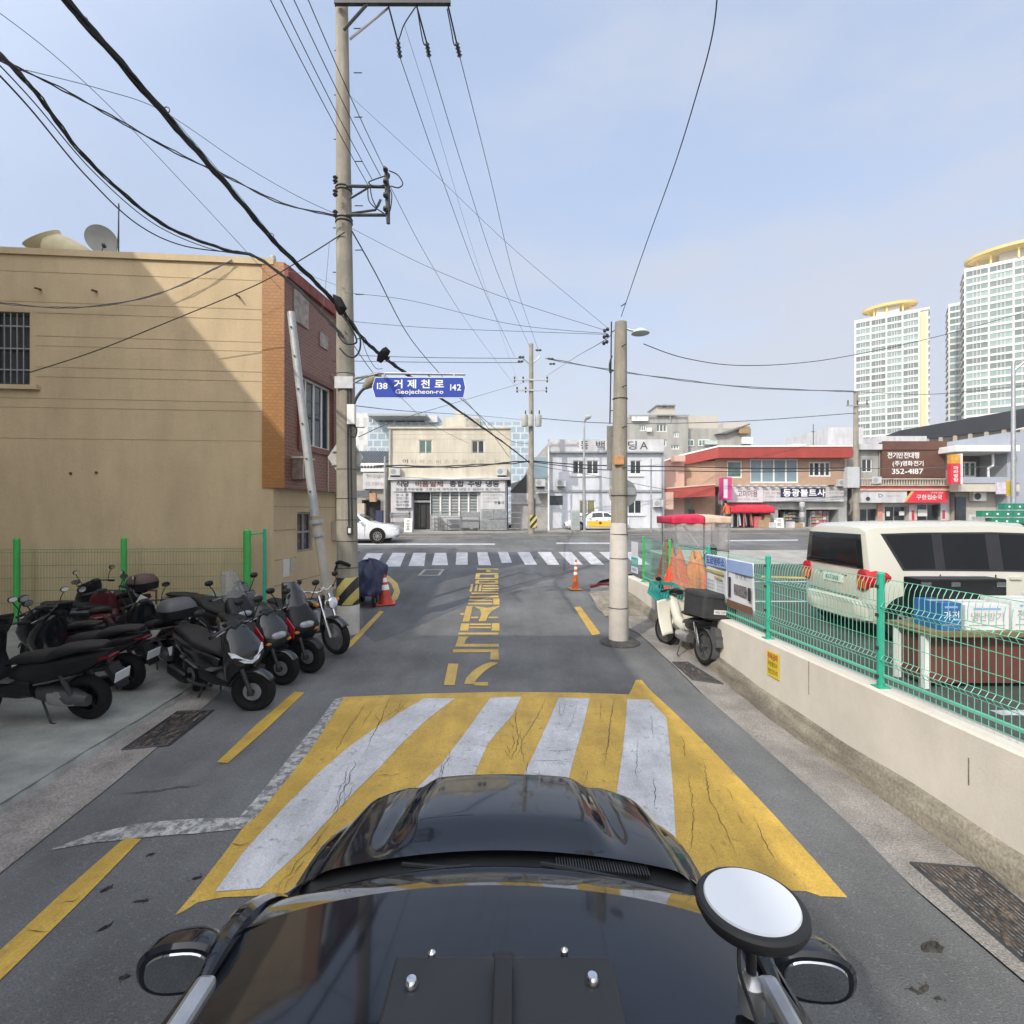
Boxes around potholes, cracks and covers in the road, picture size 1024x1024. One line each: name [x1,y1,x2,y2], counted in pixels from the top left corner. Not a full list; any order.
crack [277,698,403,891]
crack [501,699,576,775]
drain grate [121,709,214,750]
crack [688,759,781,867]
drain grate [909,861,1024,962]
drain grate [672,662,724,685]
